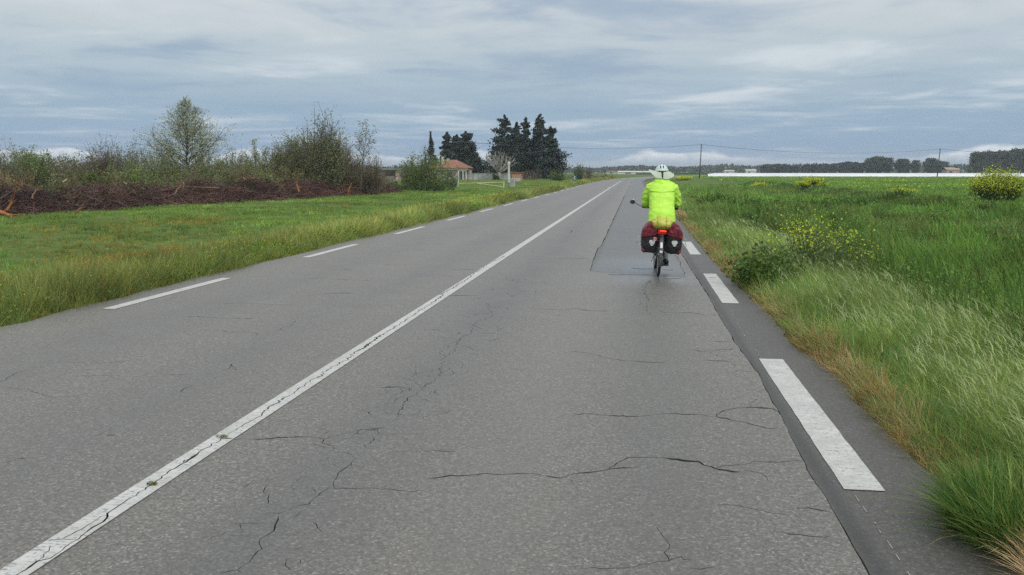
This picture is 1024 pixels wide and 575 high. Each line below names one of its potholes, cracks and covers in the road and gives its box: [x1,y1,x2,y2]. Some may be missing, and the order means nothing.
crack [16,256,797,575]
